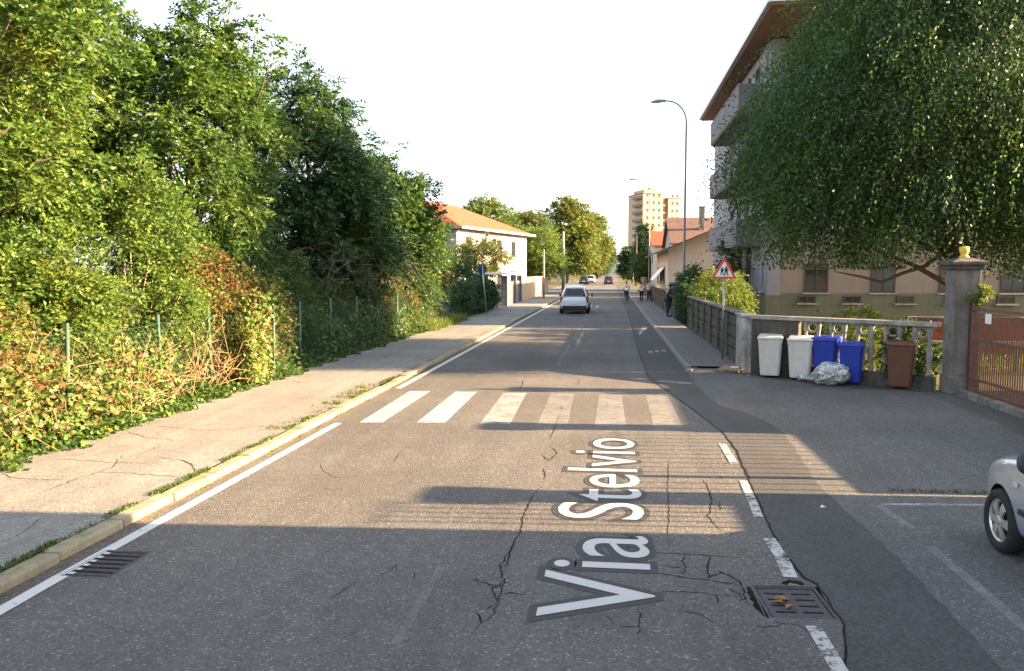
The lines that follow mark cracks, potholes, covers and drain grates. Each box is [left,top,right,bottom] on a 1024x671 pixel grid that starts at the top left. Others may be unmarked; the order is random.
crack [470,403,562,633]
crack [657,464,749,620]
drain grate [62,550,150,578]
